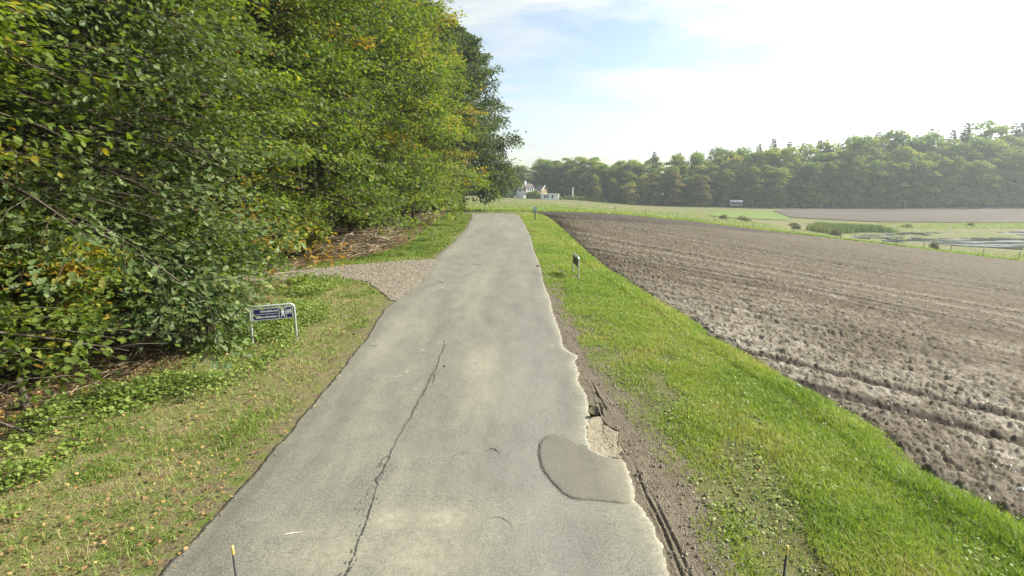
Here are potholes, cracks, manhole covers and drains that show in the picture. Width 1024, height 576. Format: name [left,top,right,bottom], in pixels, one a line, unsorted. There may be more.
crack [336,342,445,576]
pothole [587,416,624,462]
